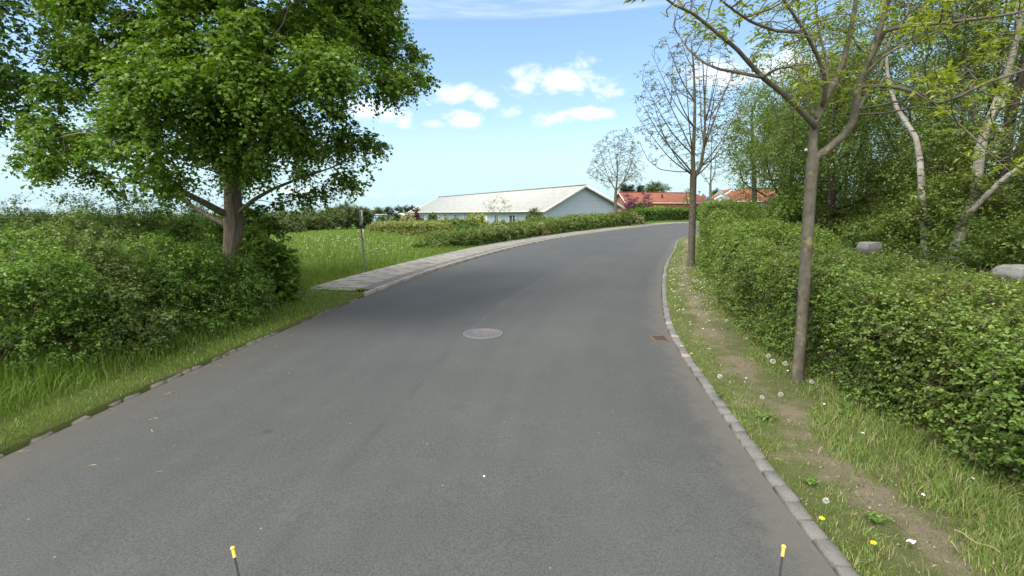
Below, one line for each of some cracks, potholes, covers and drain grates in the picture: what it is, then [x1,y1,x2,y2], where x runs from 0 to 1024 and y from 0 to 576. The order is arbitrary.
manhole cover [463,328,503,339]
